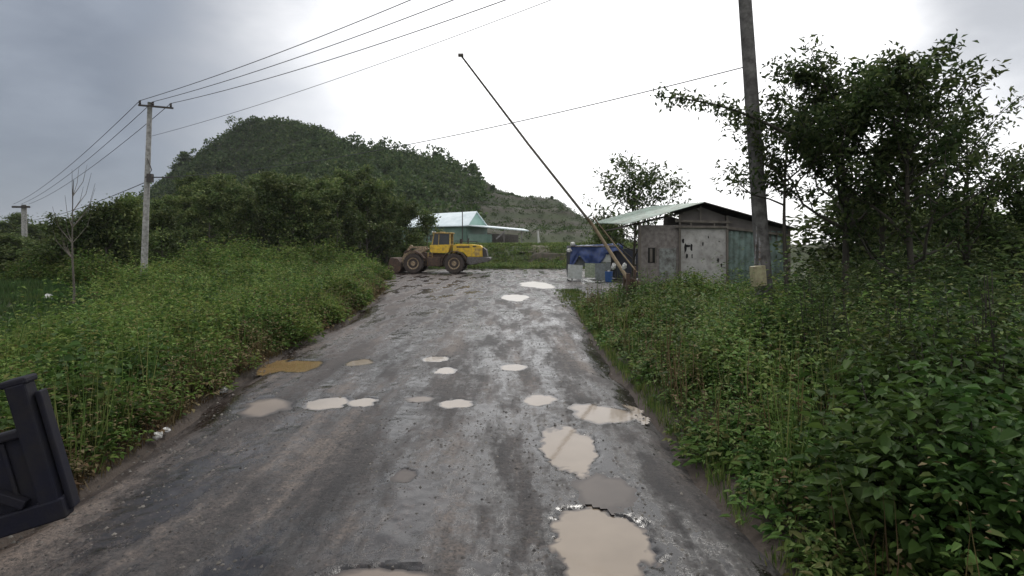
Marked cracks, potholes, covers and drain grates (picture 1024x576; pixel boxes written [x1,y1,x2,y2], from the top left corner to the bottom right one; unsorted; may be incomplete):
pothole [557,398,650,427]
pothole [309,560,459,576]
pothole [431,397,479,410]
pothole [516,391,567,408]
pothole [525,412,613,484]
pothole [494,363,534,372]
pothole [415,354,456,363]
pothole [225,393,309,420]
pothole [256,357,334,378]
pothole [520,491,684,576]
pothole [385,466,422,485]
pothole [430,366,464,376]
